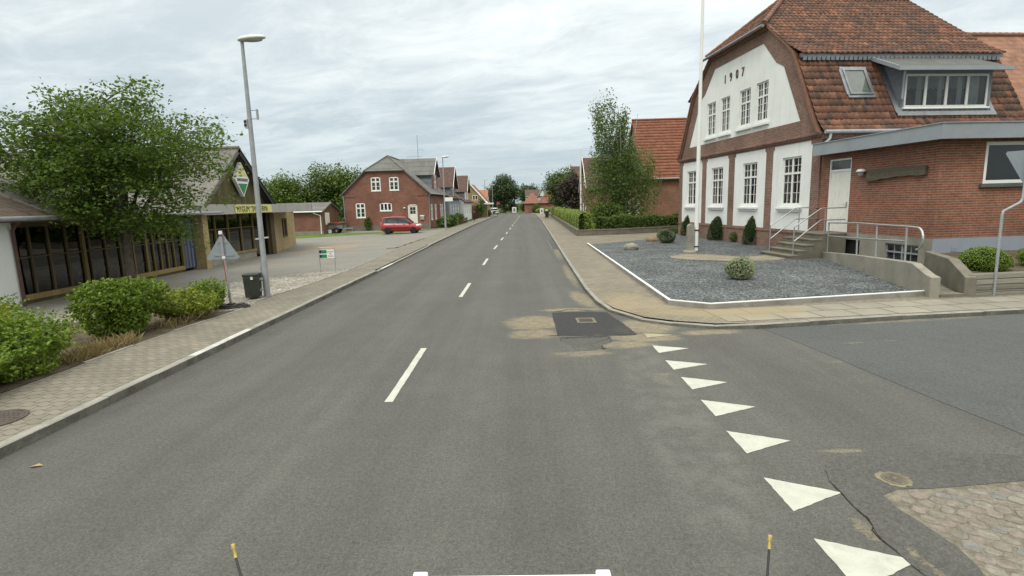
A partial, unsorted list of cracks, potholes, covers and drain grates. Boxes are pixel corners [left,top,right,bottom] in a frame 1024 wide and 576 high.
manhole cover [0,409,30,426]
crack [834,486,893,549]
manhole cover [875,471,913,487]
